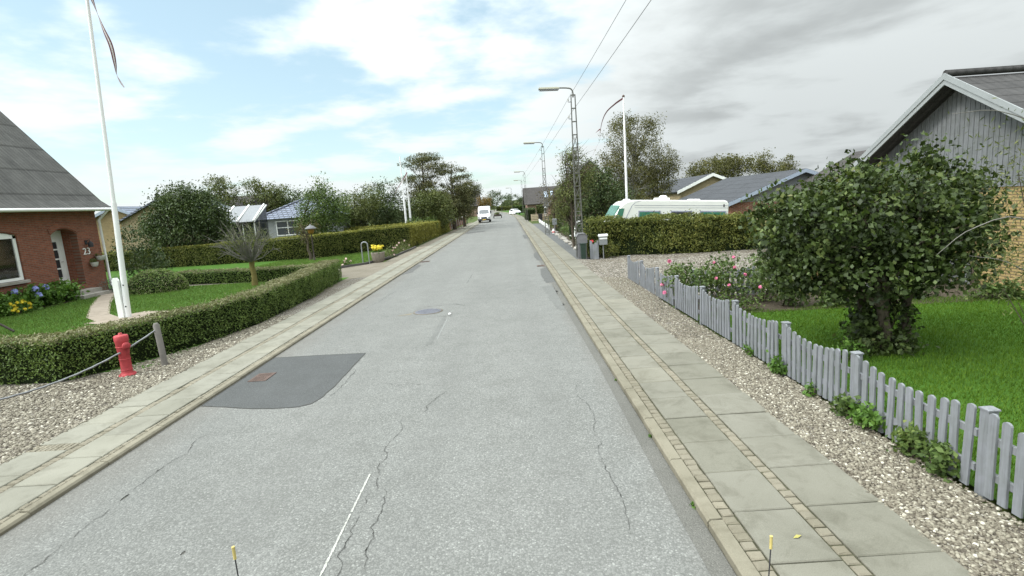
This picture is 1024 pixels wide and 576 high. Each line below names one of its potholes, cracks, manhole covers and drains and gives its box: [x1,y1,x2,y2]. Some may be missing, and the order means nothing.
crack [576,380,631,534]
crack [23,437,200,576]
crack [337,422,402,576]
